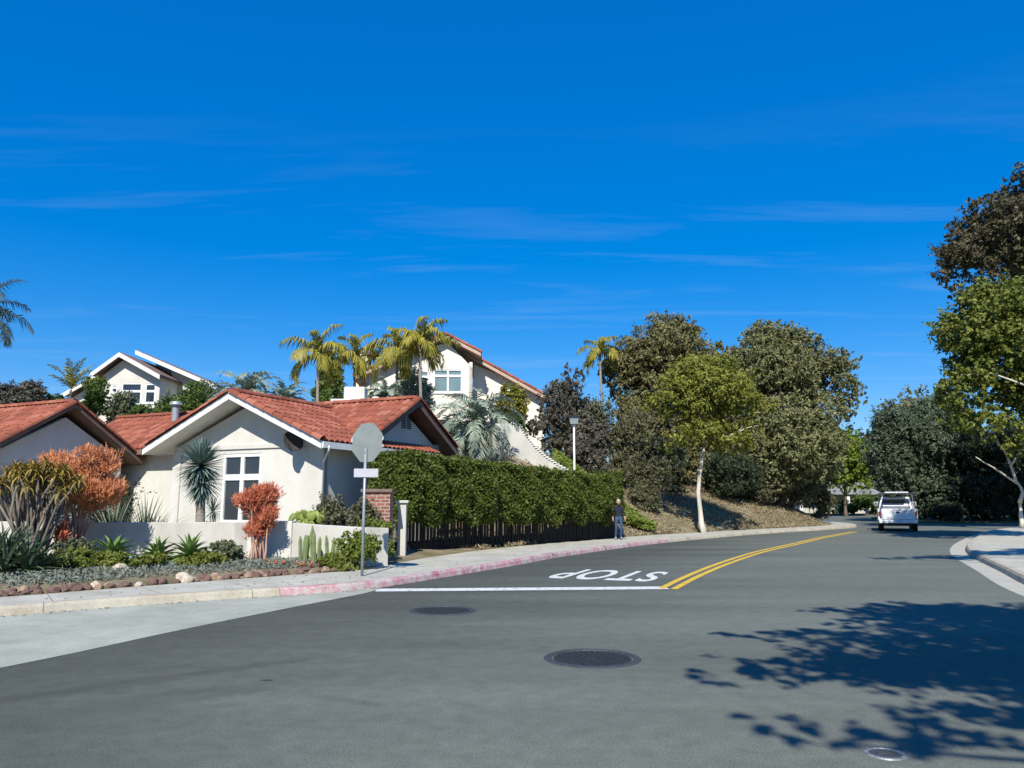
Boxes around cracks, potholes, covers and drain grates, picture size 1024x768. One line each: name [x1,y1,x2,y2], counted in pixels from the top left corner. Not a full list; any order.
utility cover [863,747,908,761]
manhole cover [409,606,476,616]
manhole cover [544,649,641,669]
